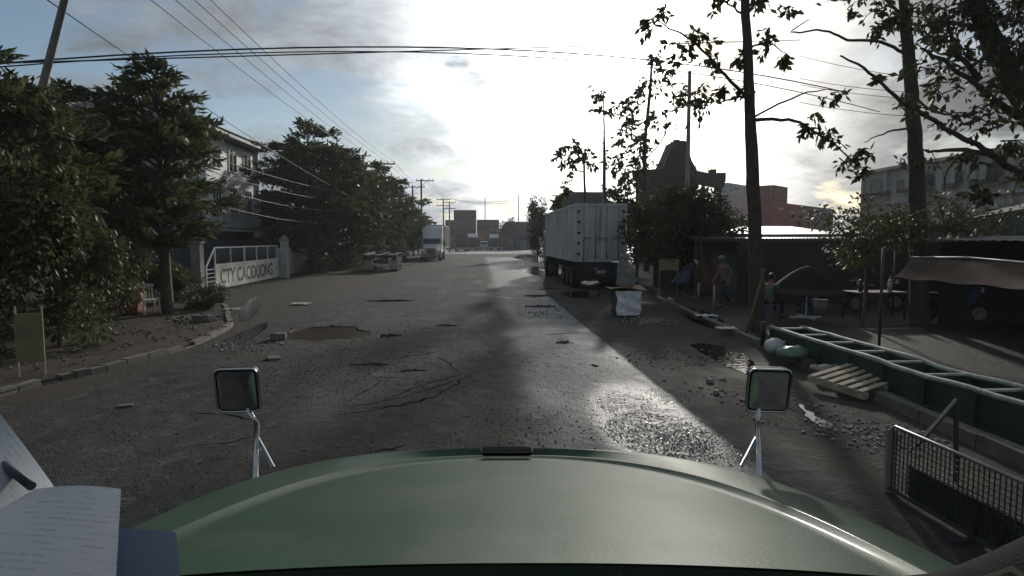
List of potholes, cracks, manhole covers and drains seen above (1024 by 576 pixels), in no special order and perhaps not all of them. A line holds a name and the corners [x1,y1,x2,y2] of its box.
crack [347,351,470,414]
pothole [267,324,372,342]
crack [189,413,264,445]
